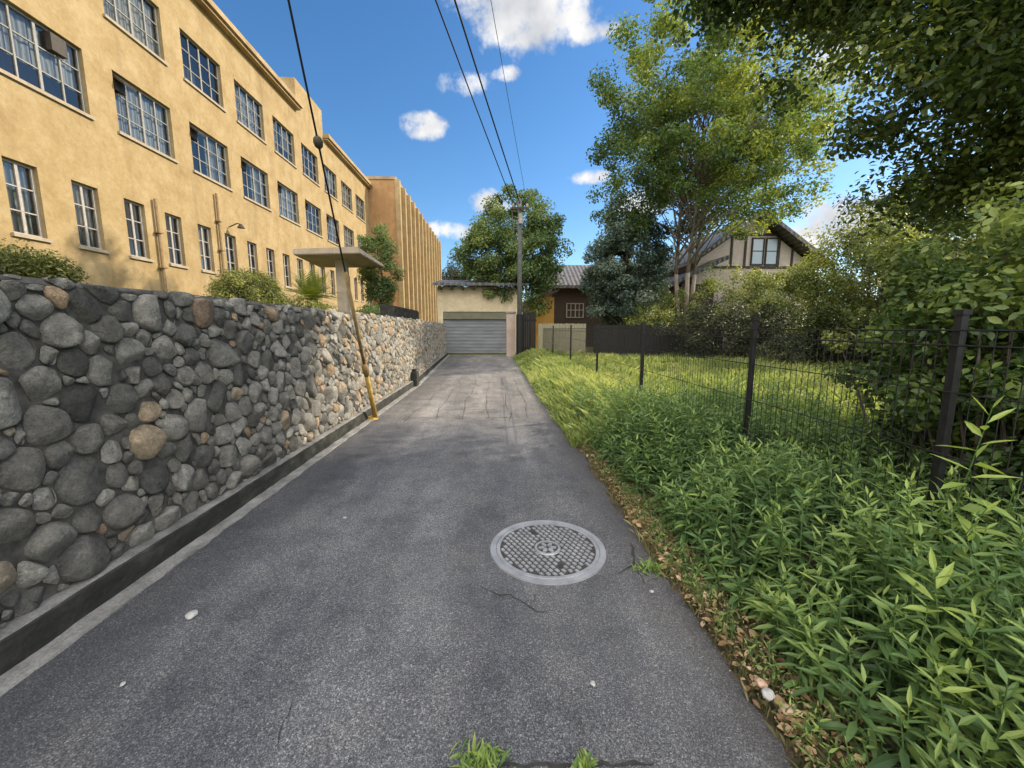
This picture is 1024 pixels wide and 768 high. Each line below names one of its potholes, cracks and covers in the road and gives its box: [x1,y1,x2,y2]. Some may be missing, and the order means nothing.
crack [405,376,528,421]
crack [606,543,645,585]
crack [446,759,655,768]
crack [271,696,294,752]
crack [479,585,548,612]
manhole cover [490,520,606,585]
